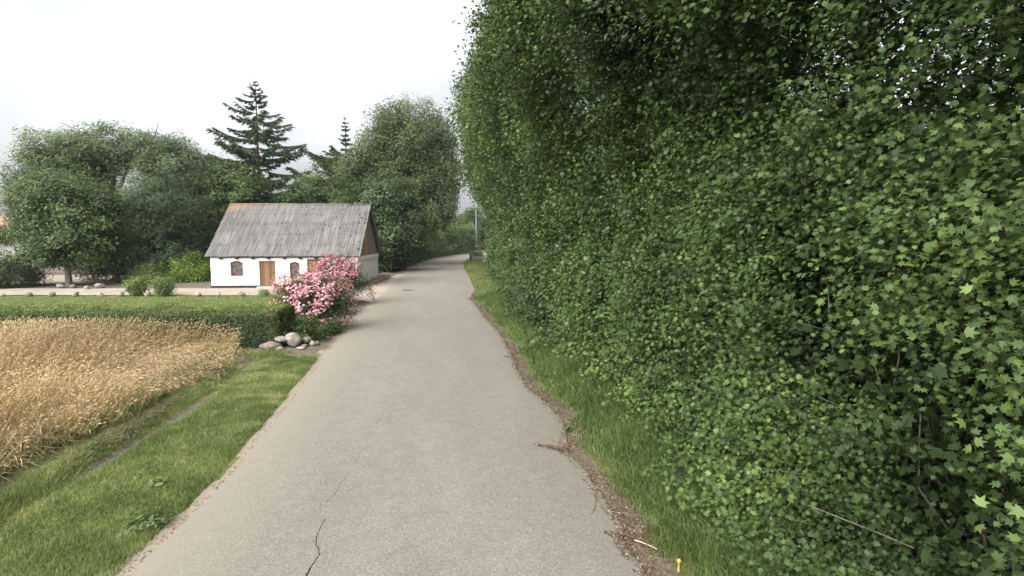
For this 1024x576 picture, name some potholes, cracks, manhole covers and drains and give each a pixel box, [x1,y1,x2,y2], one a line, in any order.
crack [306,415,383,576]
